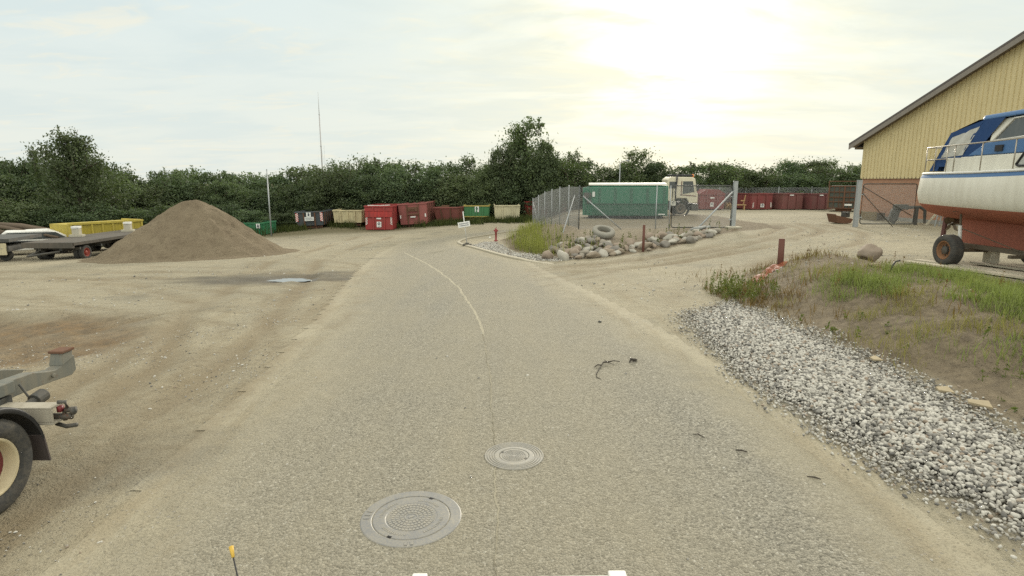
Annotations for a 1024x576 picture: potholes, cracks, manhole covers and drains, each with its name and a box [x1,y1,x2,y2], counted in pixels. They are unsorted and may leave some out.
manhole cover [485,442,544,470]
manhole cover [360,491,461,548]
